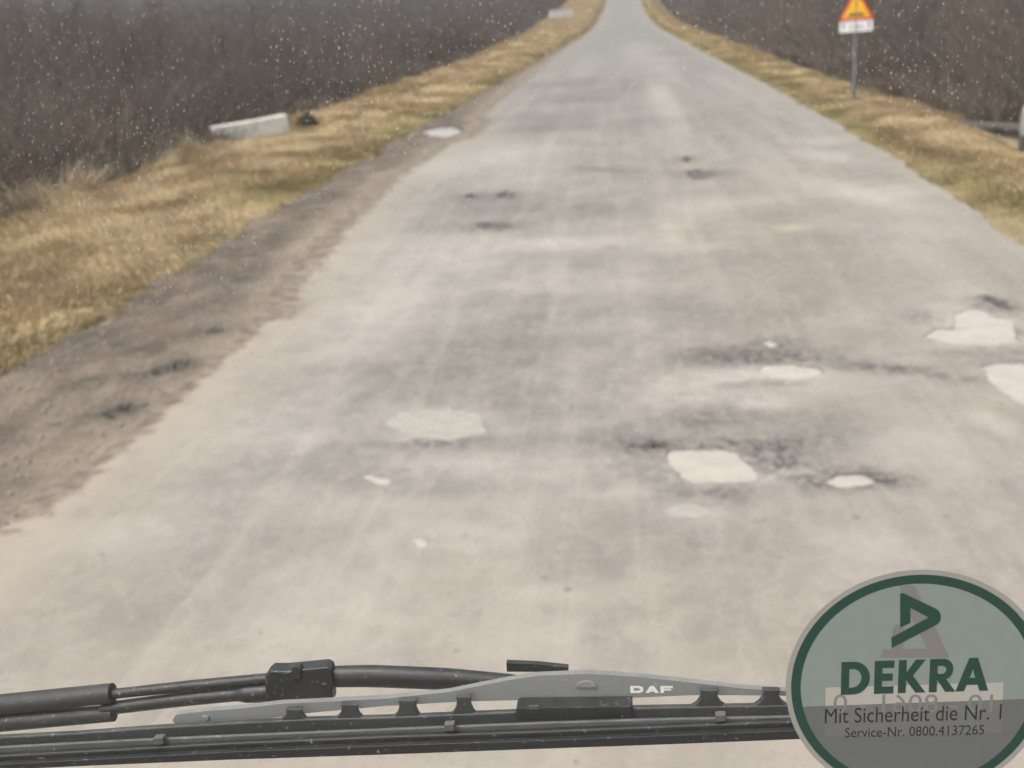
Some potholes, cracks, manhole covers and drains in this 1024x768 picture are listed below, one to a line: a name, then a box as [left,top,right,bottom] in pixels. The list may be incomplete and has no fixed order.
pothole [978,294,1012,309]
pothole [686,169,717,180]
pothole [496,191,517,199]
pothole [476,222,514,230]
pothole [100,403,151,419]
pothole [147,359,198,378]
pothole [644,439,669,449]
